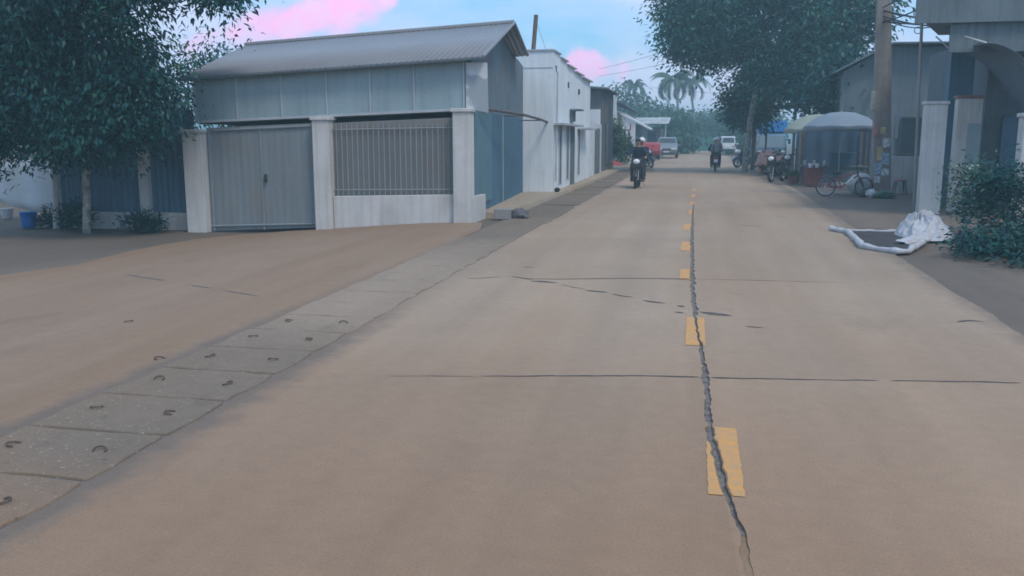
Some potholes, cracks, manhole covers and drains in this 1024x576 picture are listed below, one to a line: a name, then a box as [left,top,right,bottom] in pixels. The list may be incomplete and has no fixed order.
crack [487,205,1023,576]
